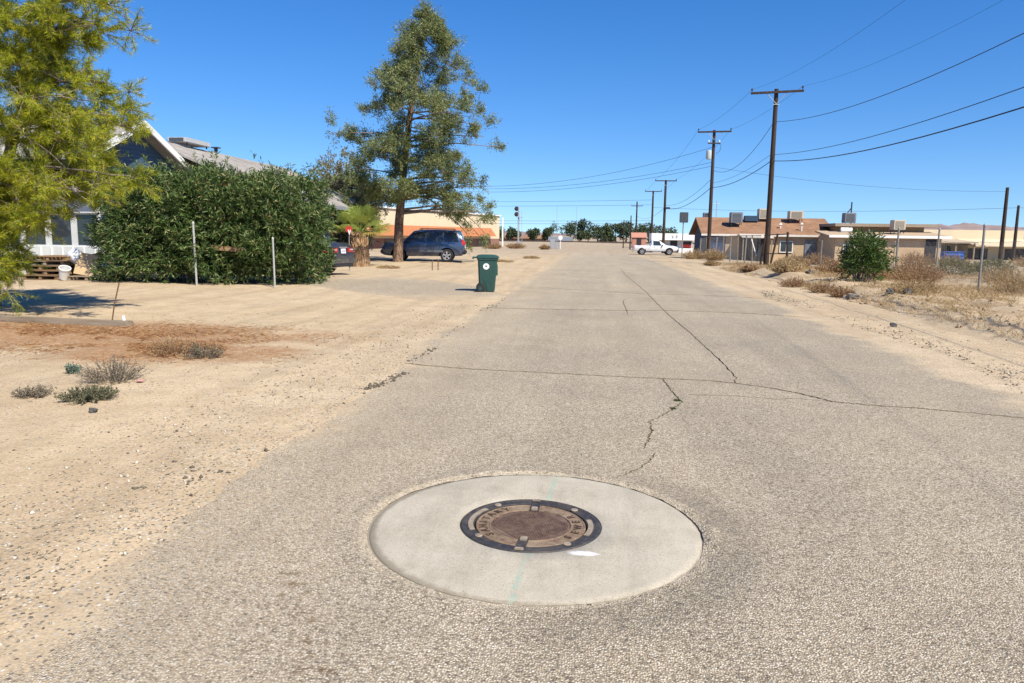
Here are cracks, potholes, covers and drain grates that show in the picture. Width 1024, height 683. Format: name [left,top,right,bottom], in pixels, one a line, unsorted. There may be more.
crack [406,269,1022,478]
manhole cover [460,499,601,553]
